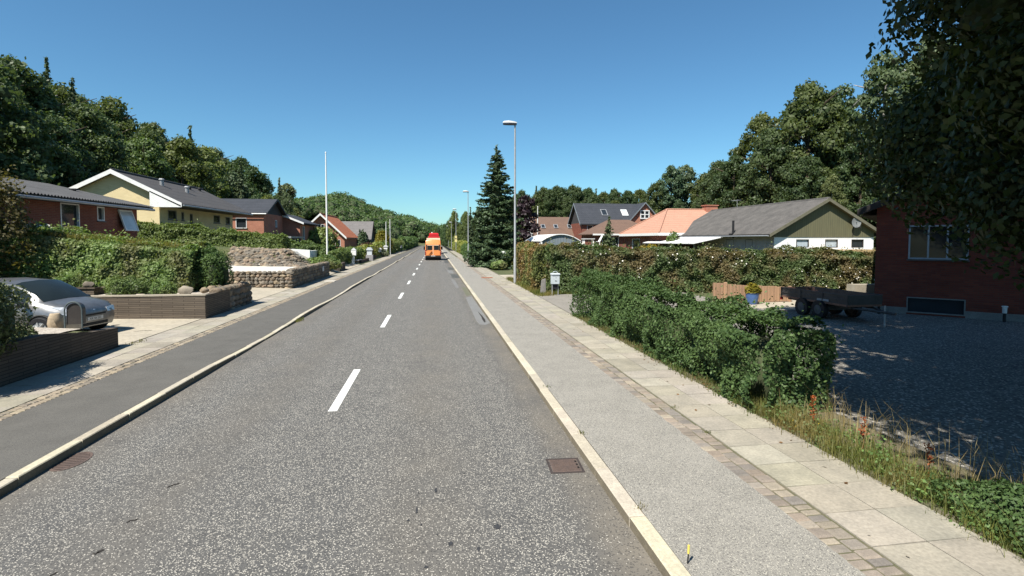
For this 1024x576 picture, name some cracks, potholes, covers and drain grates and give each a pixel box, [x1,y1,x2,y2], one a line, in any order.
manhole cover [546,458,585,474]
